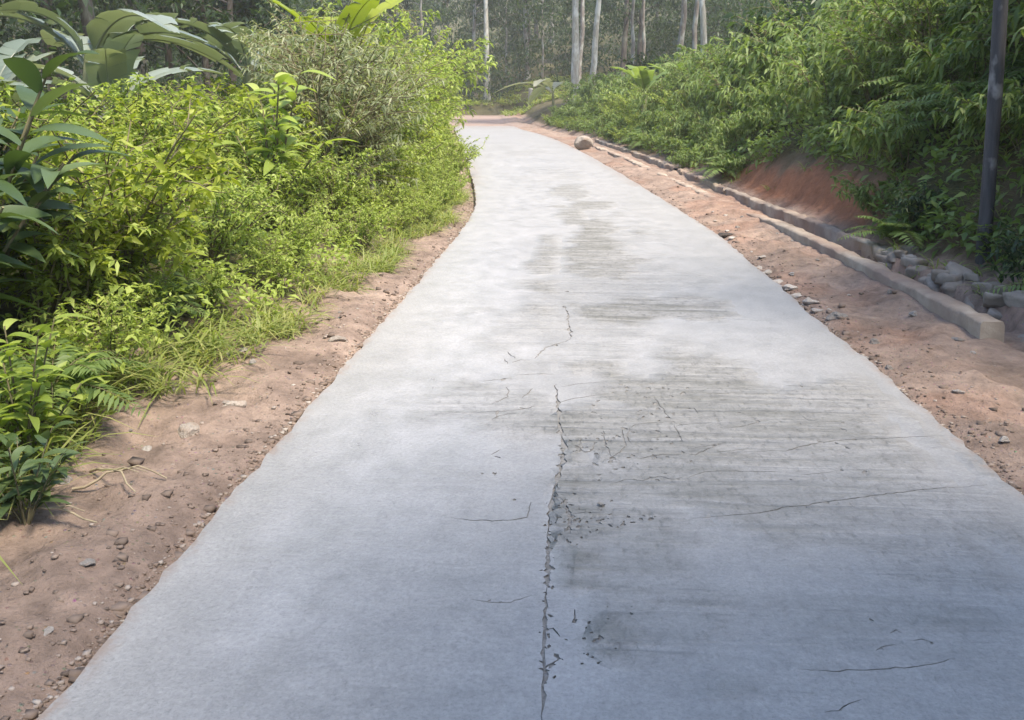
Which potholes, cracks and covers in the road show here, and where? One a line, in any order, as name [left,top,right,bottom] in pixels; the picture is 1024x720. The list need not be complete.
crack [452,291,926,720]
crack [702,484,987,518]
crack [804,618,956,672]
